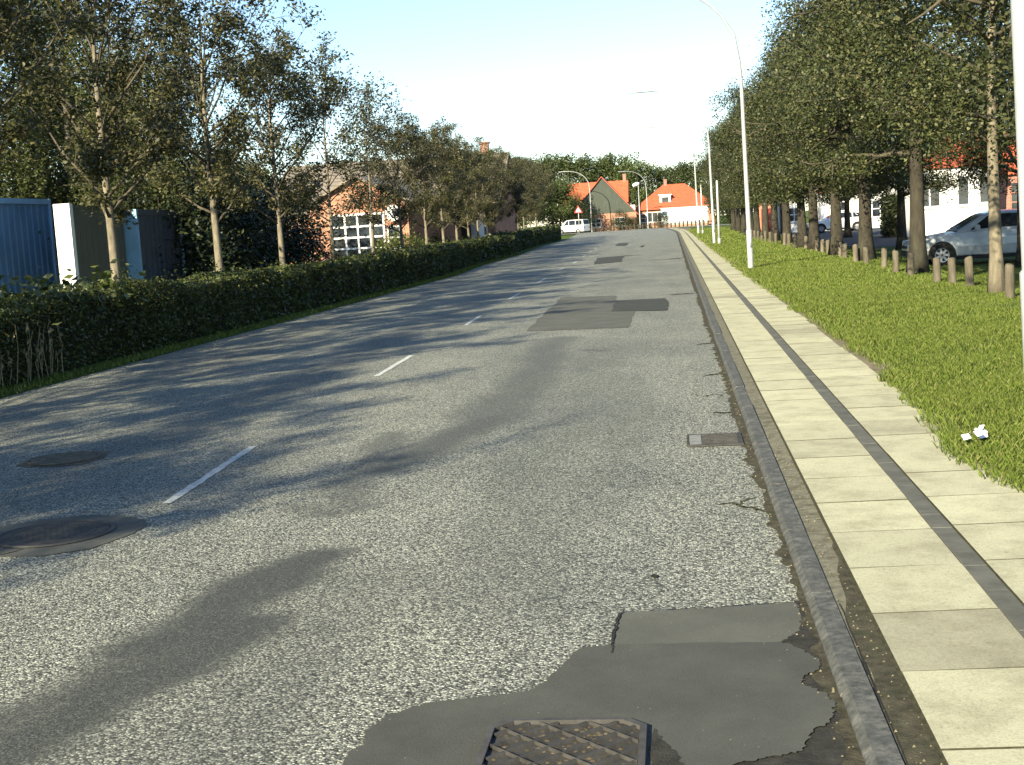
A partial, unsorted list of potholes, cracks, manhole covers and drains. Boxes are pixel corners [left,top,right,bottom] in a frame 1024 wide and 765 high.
manhole cover [0,519,116,548]
manhole cover [25,451,101,465]
drain grate [686,432,744,447]
crack [717,497,765,512]
crack [611,610,624,653]
